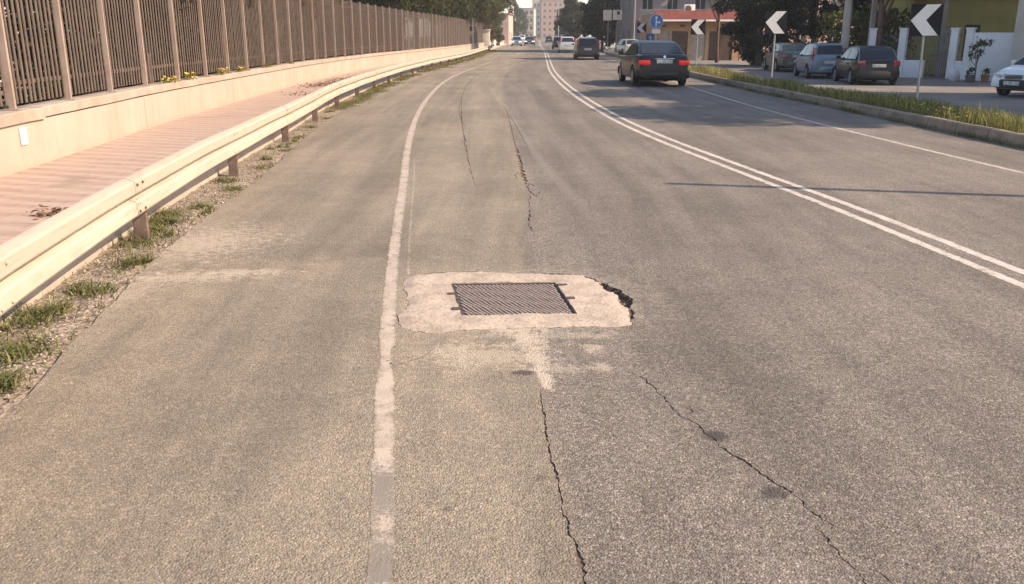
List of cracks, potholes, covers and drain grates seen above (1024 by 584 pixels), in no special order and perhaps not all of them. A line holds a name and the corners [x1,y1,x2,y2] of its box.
manhole cover [448,283,576,315]
crack [632,373,893,584]
crack [540,390,588,584]
crack [503,105,540,233]
crack [458,75,477,185]
pothole [599,283,635,320]
